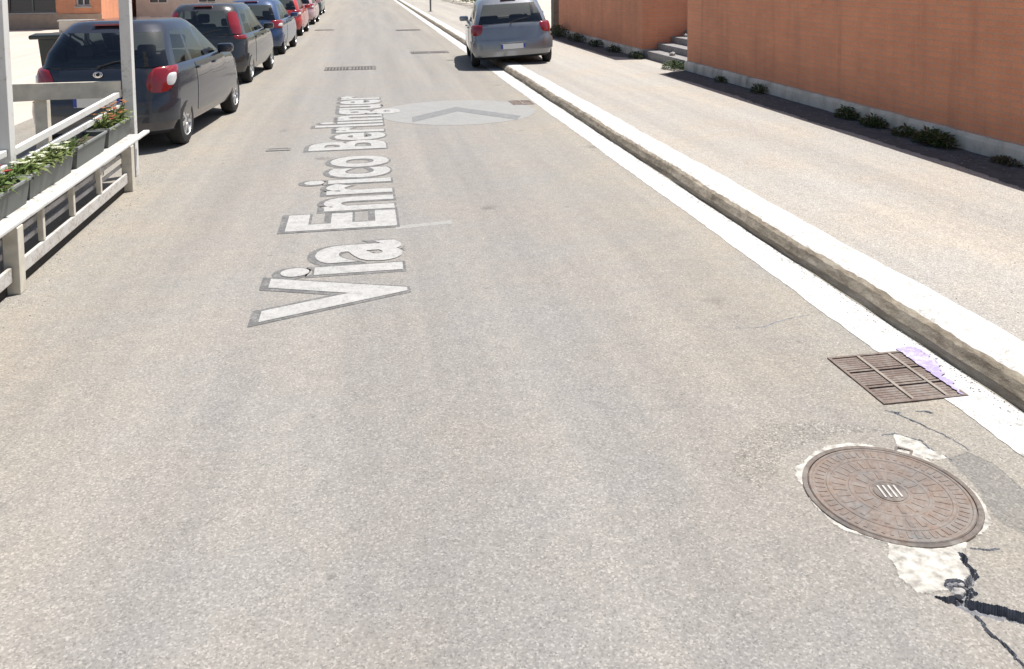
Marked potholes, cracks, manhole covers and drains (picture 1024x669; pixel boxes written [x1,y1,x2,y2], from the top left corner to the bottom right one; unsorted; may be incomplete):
crack [734,314,810,329]
drain grate [827,351,968,405]
manhole cover [802,446,985,549]
crack [934,547,1024,669]
crack [881,410,969,460]
